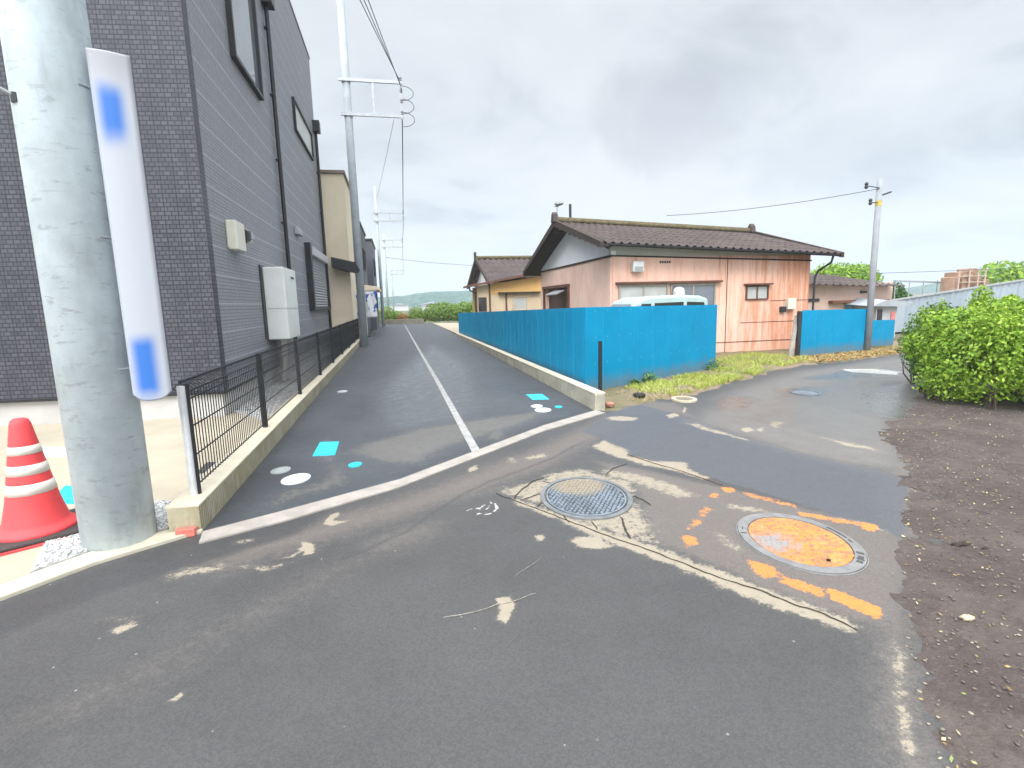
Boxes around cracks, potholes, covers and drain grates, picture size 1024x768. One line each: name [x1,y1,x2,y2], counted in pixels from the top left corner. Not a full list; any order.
crack [443,593,535,618]
manhole cover [540,477,633,520]
manhole cover [736,513,869,576]
crack [496,478,857,630]
